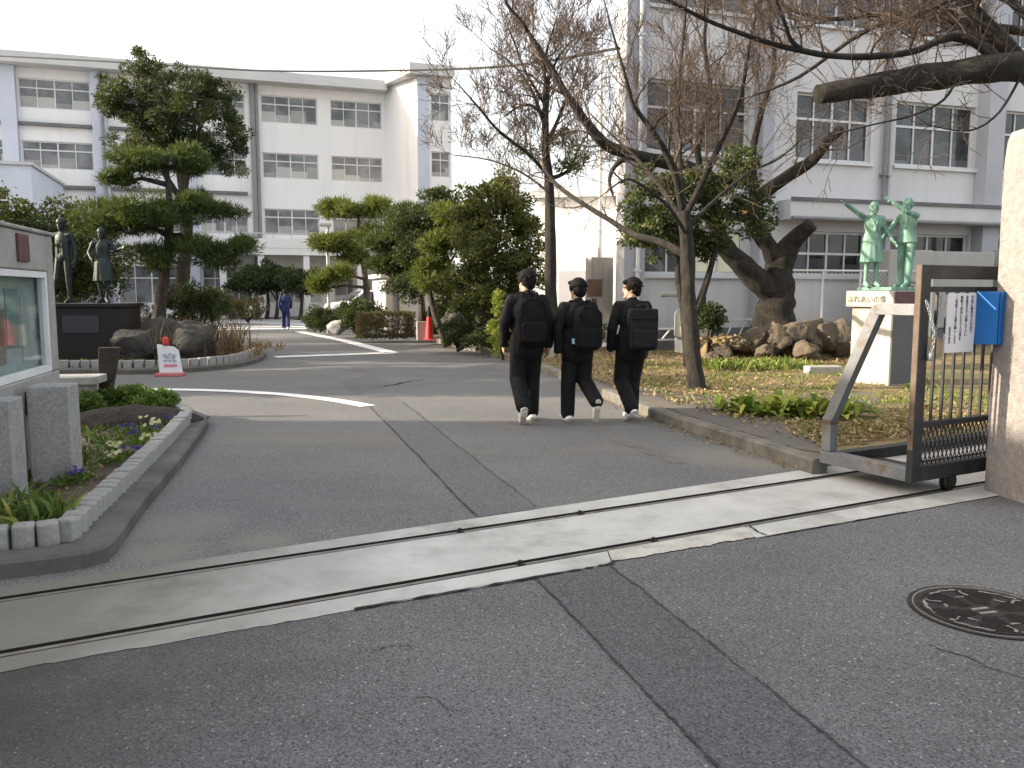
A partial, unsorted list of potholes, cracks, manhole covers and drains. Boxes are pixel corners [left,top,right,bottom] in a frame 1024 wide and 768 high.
crack [370,380,536,516]
crack [930,644,1023,678]
manhole cover [907,585,1024,641]
